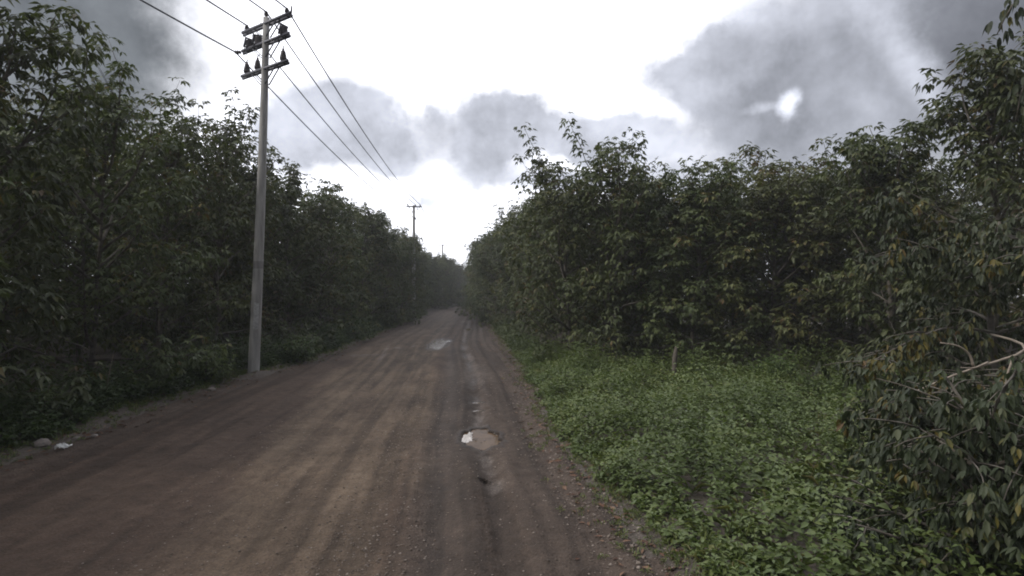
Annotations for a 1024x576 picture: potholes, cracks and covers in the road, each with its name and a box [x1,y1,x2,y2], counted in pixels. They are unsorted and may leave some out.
pothole [453,424,510,455]
pothole [424,338,454,351]
